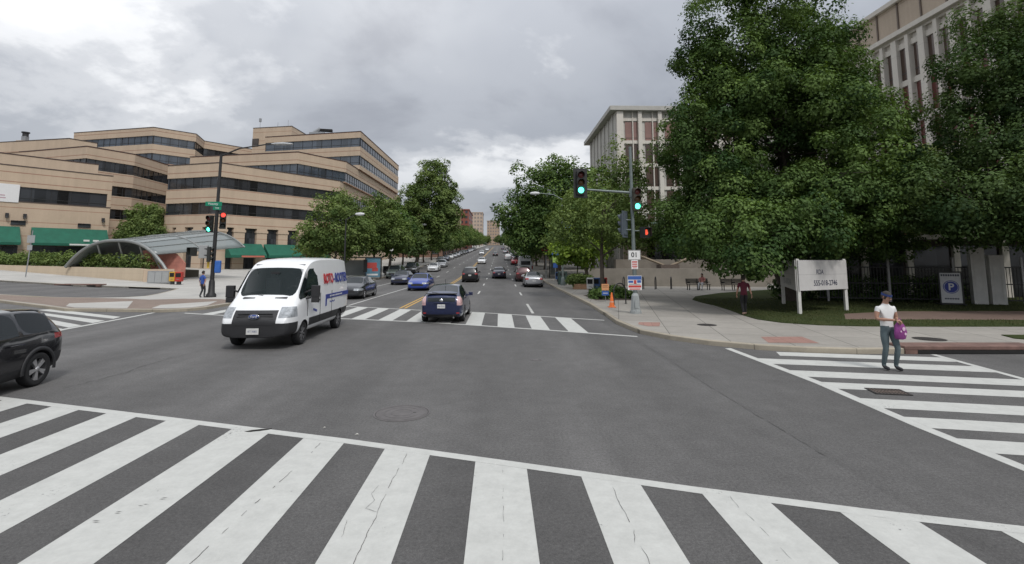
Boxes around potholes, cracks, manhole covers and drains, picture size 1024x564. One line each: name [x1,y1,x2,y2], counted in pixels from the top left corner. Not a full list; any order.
crack [341,454,407,564]
drain grate [865,388,913,396]
manhole cover [373,405,430,422]
